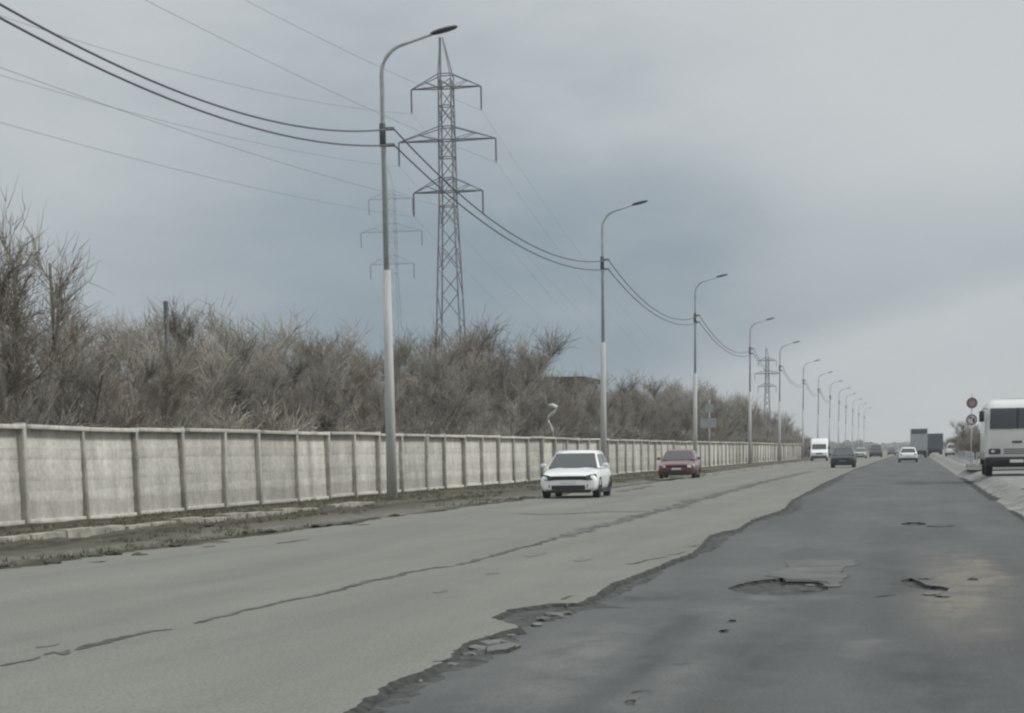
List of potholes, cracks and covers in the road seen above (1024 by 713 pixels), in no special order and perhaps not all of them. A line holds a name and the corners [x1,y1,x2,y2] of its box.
pothole [728,578,828,595]
pothole [446,637,521,671]
pothole [901,578,949,591]
pothole [500,603,630,627]
crack [0,650,70,666]
